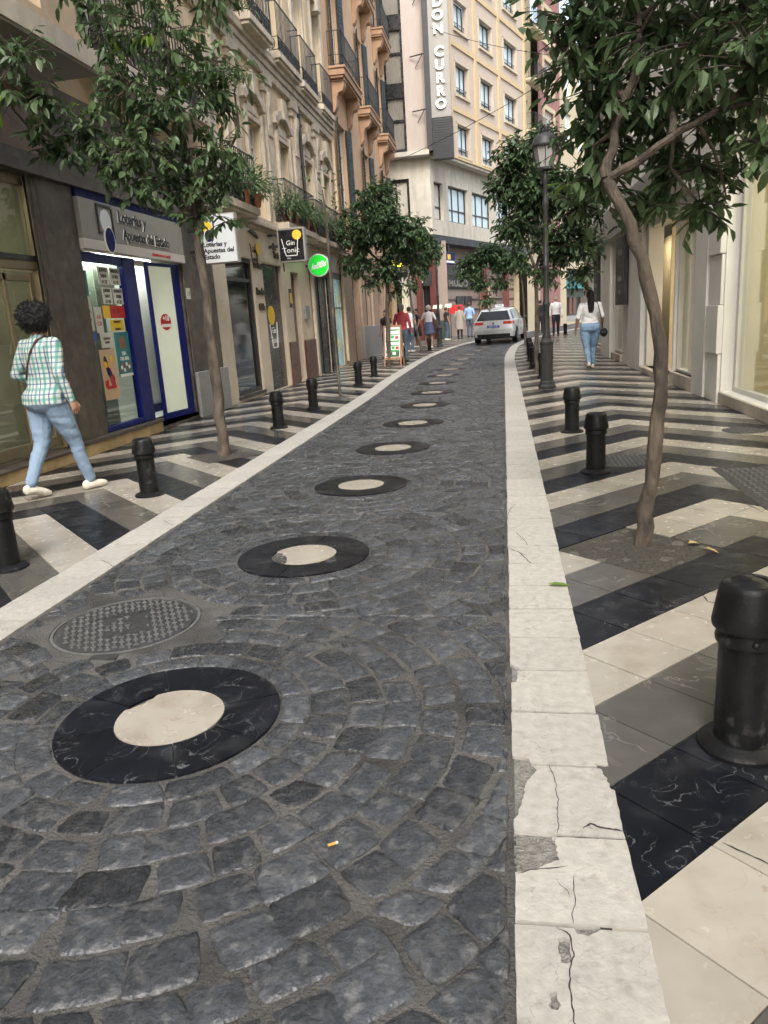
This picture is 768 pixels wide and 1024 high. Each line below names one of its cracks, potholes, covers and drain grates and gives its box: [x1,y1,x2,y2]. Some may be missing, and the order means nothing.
pothole [514,833,557,872]
crack [583,823,621,831]
crack [549,767,559,833]
pothole [514,759,535,818]
crack [722,842,768,864]
manhole cover [50,597,201,661]
